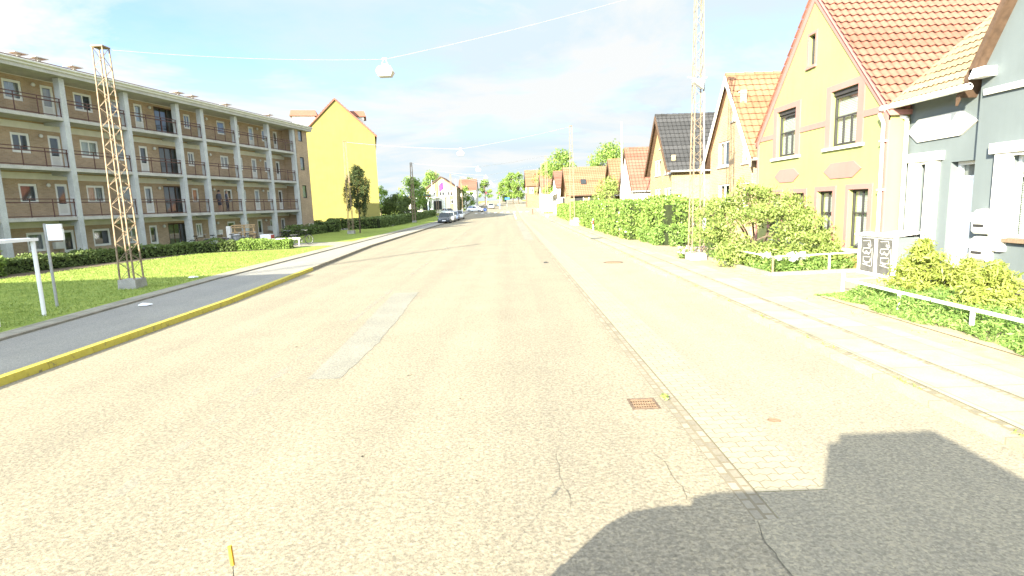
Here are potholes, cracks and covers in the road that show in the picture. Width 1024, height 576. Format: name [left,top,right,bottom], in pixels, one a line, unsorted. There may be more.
drain grate [627,398,661,410]
